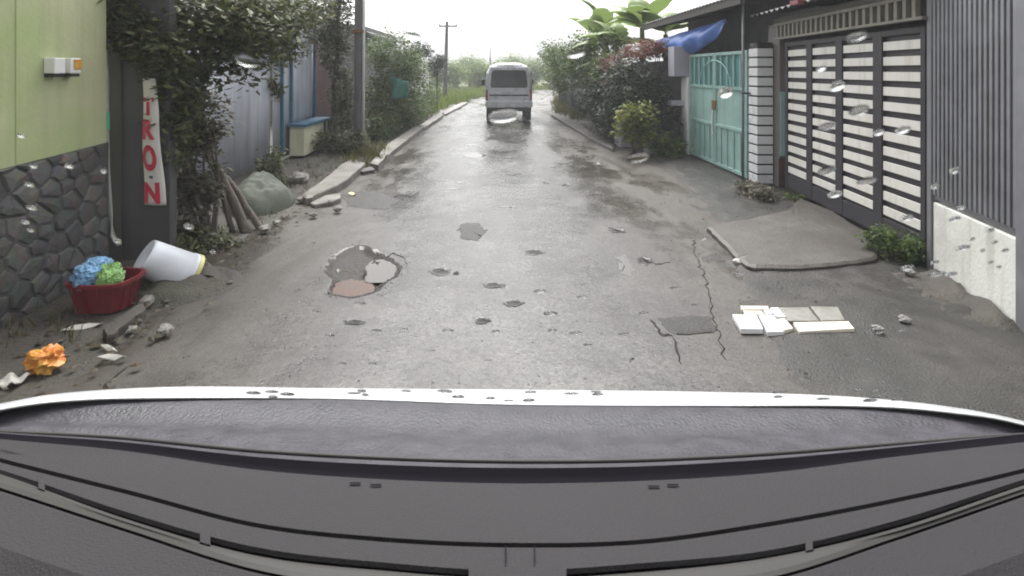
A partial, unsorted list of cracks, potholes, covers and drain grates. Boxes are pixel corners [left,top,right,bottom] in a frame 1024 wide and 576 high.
crack [650,319,714,364]
pothole [324,245,402,297]
pothole [430,267,450,275]
